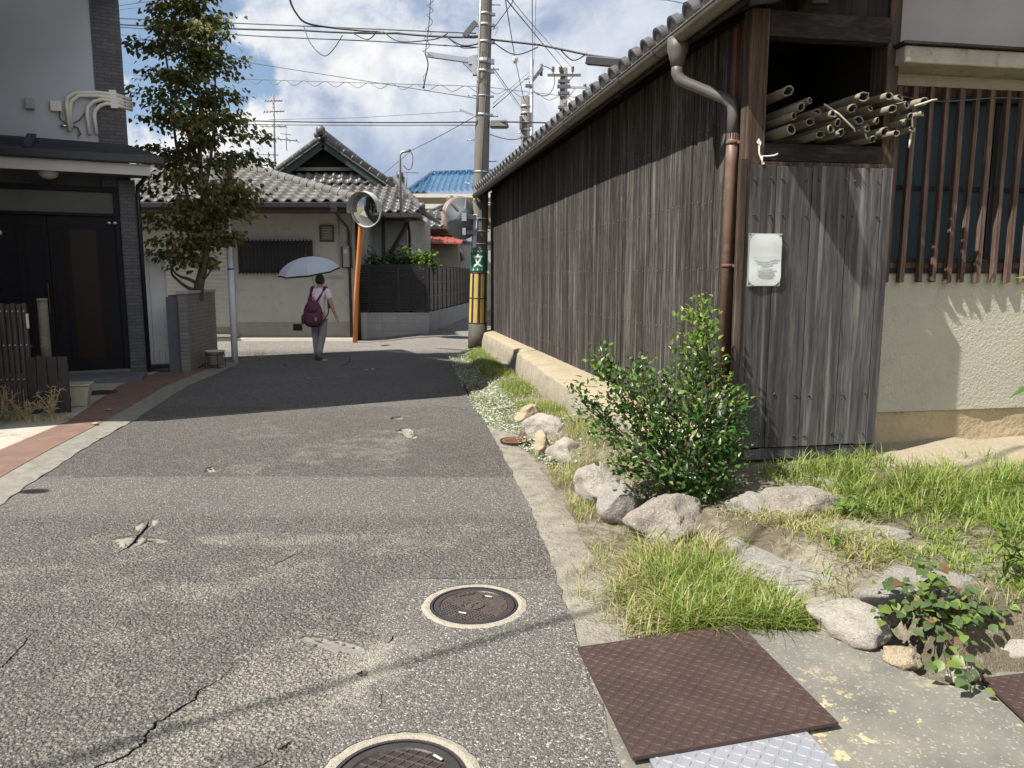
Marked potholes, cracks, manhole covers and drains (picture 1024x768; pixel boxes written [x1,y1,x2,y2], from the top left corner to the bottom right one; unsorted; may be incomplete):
pothole [395,427,418,439]
crack [0,630,37,668]
pothole [297,635,366,655]
manhole cover [421,584,527,629]
crack [94,673,229,768]
manhole cover [324,732,480,768]
manhole cover [500,437,528,447]
